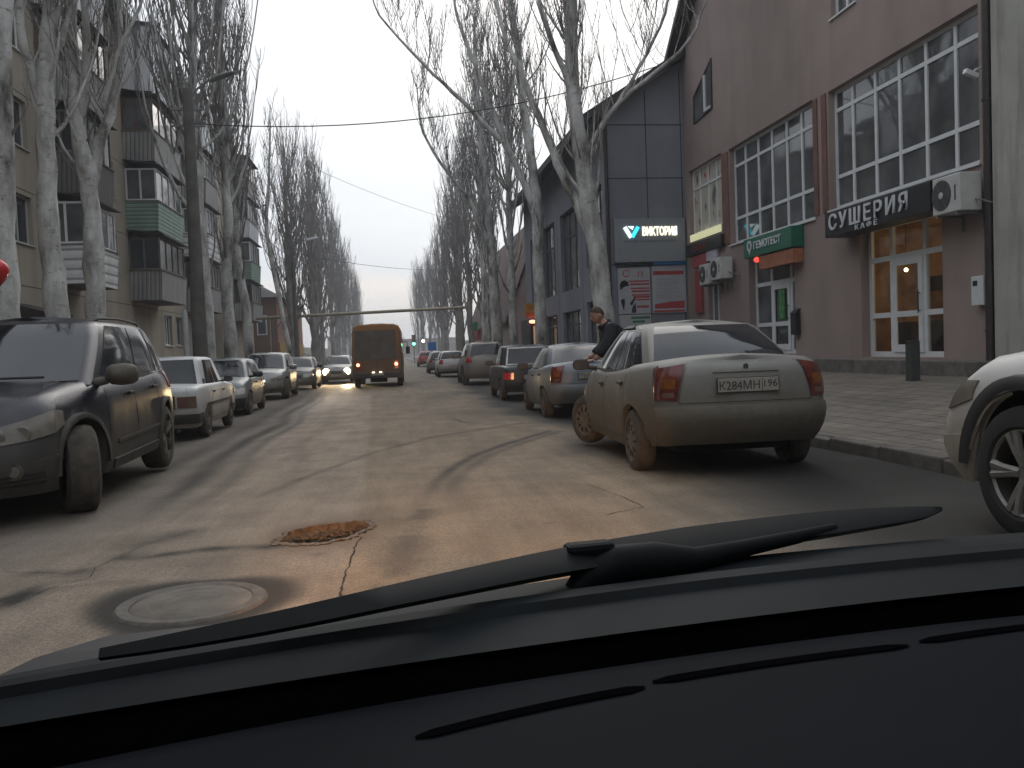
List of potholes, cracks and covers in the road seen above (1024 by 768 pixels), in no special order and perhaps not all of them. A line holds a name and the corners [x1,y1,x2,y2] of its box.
pothole [270,519,376,546]
crack [339,537,362,596]
manhole cover [112,581,268,627]
